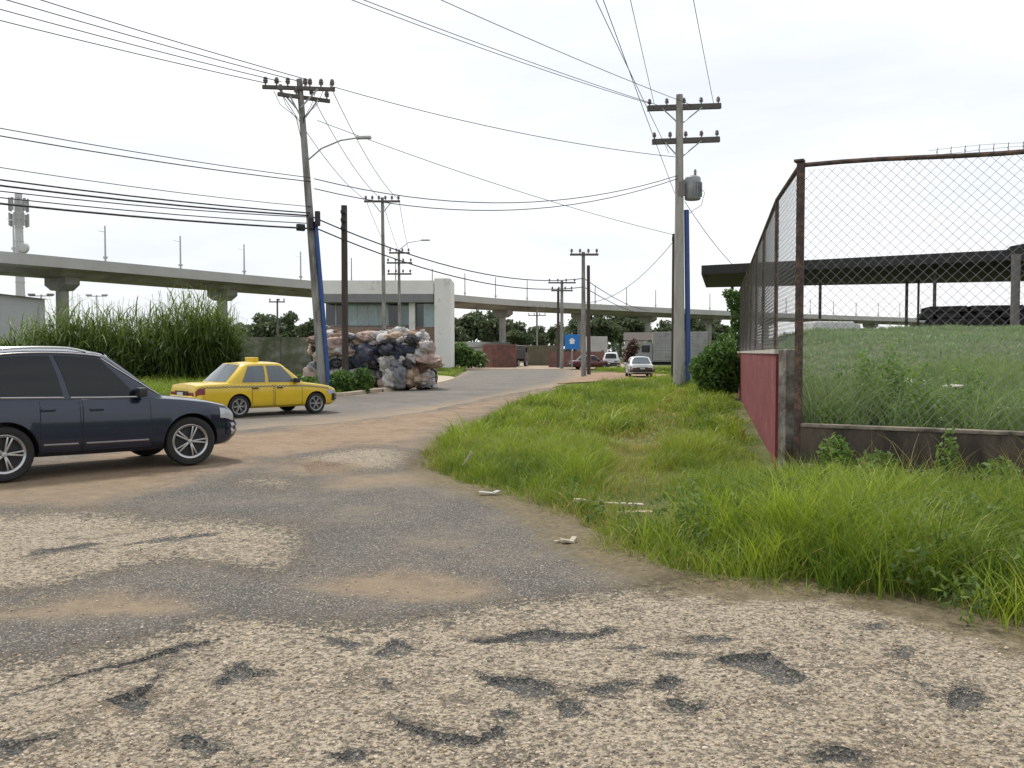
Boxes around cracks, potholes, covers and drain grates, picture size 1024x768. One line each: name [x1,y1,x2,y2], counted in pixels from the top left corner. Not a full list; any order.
pothole [497,709,520,719]
crack [125,533,219,545]
pothole [393,717,506,747]
pothole [331,748,374,762]
pothole [716,652,808,685]
pothole [176,733,223,754]
pothole [212,662,274,686]
pothole [106,683,154,713]
pothole [375,639,415,656]
pothole [665,697,706,713]
pothole [893,648,912,657]
pothole [466,627,619,644]
